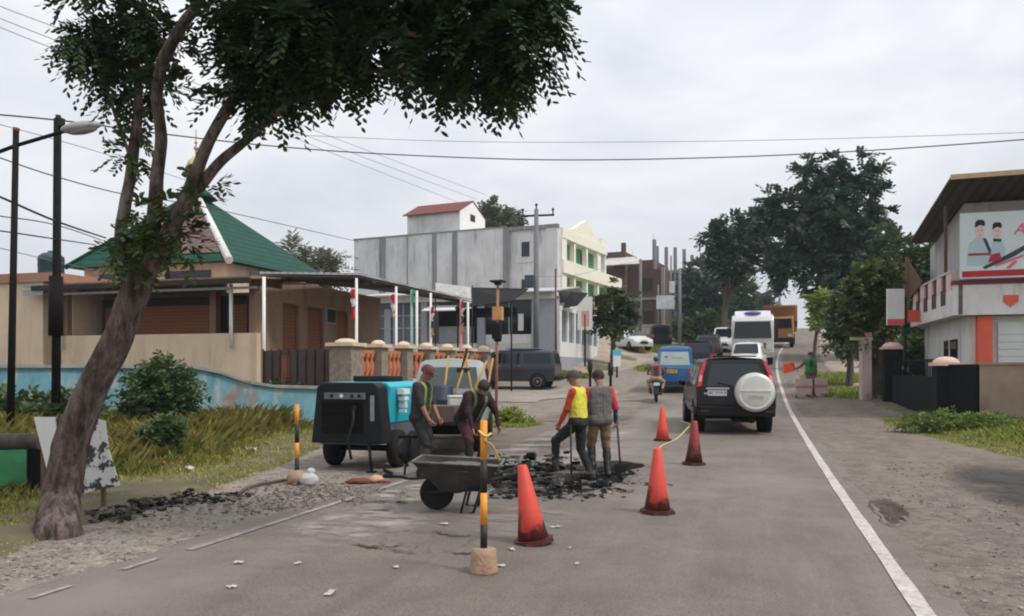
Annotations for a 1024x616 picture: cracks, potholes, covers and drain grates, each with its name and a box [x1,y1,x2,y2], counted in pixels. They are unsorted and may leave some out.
pothole [487,460,651,500]
pothole [868,499,911,528]
crack [351,530,476,554]
